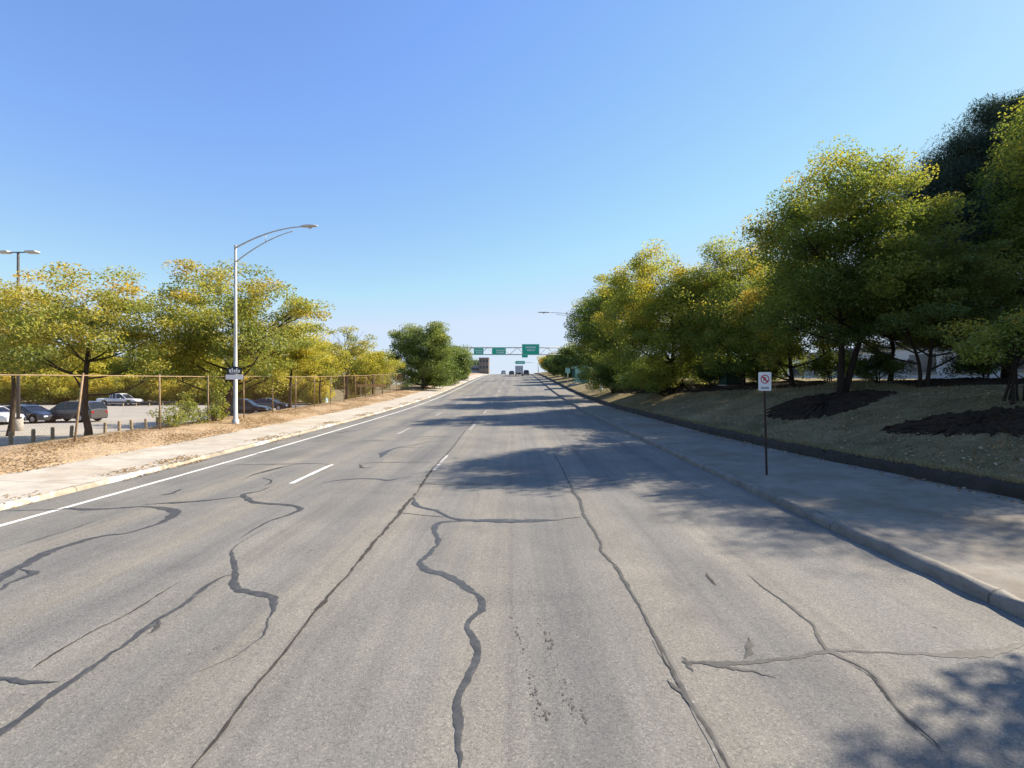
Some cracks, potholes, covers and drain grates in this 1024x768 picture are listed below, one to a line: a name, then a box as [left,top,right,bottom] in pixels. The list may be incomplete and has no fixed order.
crack [19,581,182,678]
